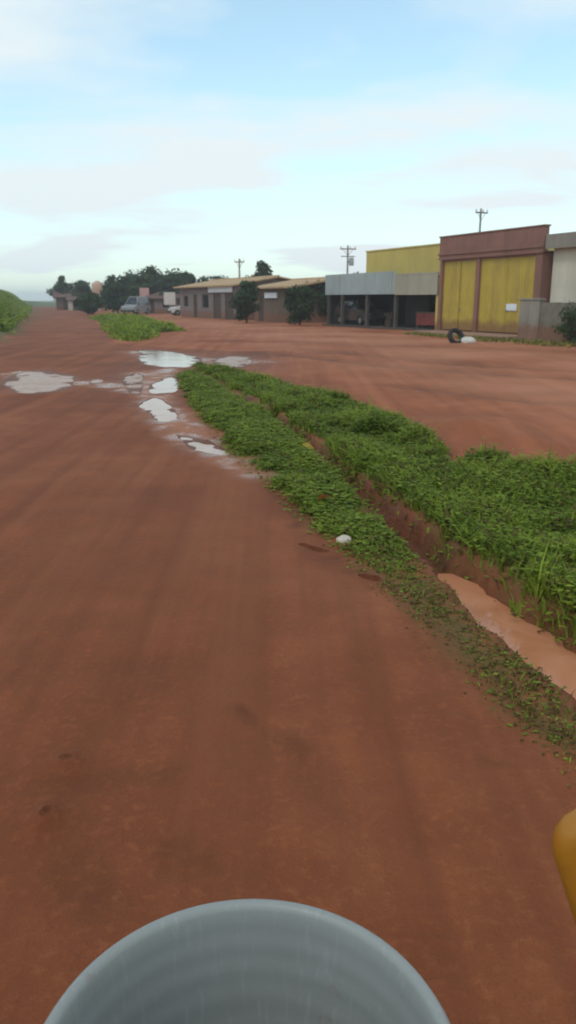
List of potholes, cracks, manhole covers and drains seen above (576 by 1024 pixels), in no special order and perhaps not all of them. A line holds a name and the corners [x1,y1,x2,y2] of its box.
pothole [212,355,253,368]
pothole [137,350,203,368]
pothole [139,397,179,422]
pothole [175,434,231,455]
pothole [148,377,181,395]
pothole [3,370,75,393]
pothole [121,373,145,395]
